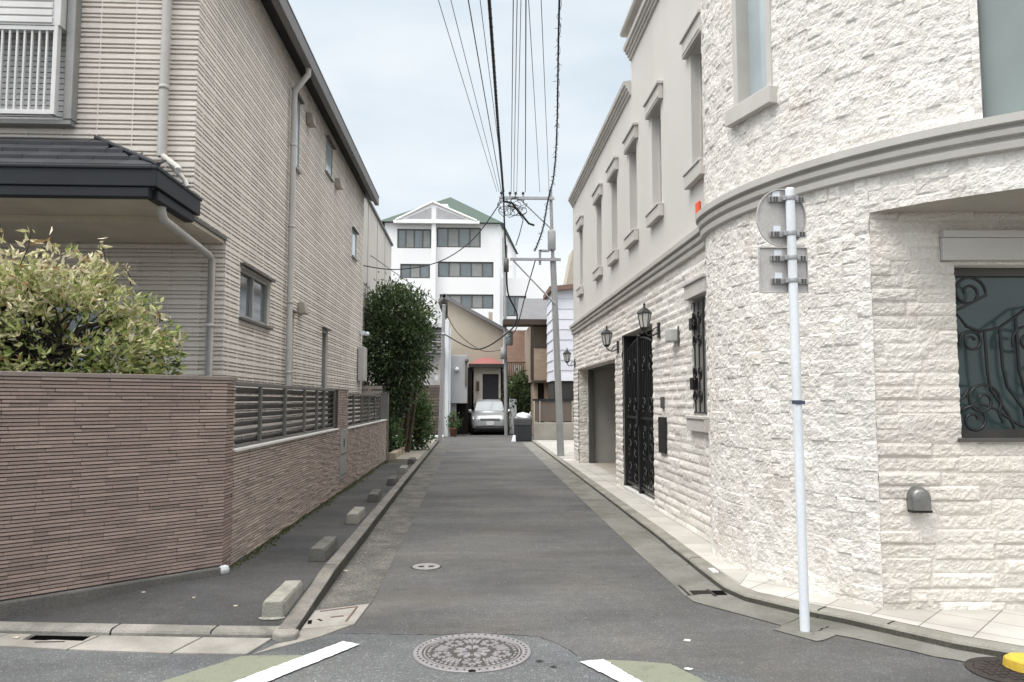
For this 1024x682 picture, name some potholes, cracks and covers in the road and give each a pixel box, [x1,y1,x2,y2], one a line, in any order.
manhole cover [413,633,531,673]
drain grate [27,635,90,643]
manhole cover [964,657,1024,682]
drain grate [678,585,727,596]
